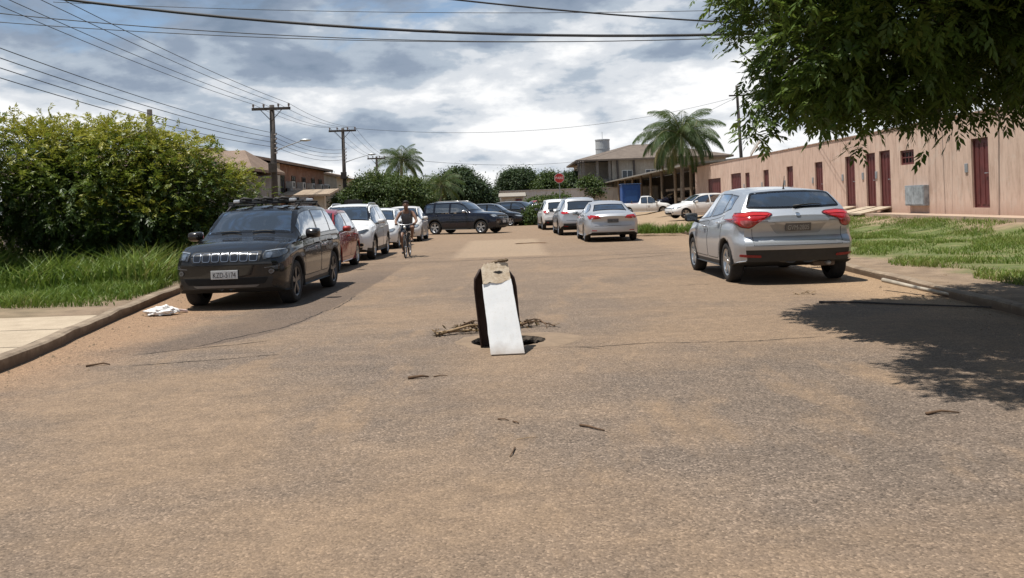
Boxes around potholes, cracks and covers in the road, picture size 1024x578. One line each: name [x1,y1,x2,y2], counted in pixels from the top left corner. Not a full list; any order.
pothole [455,332,582,350]
crack [588,336,819,349]
